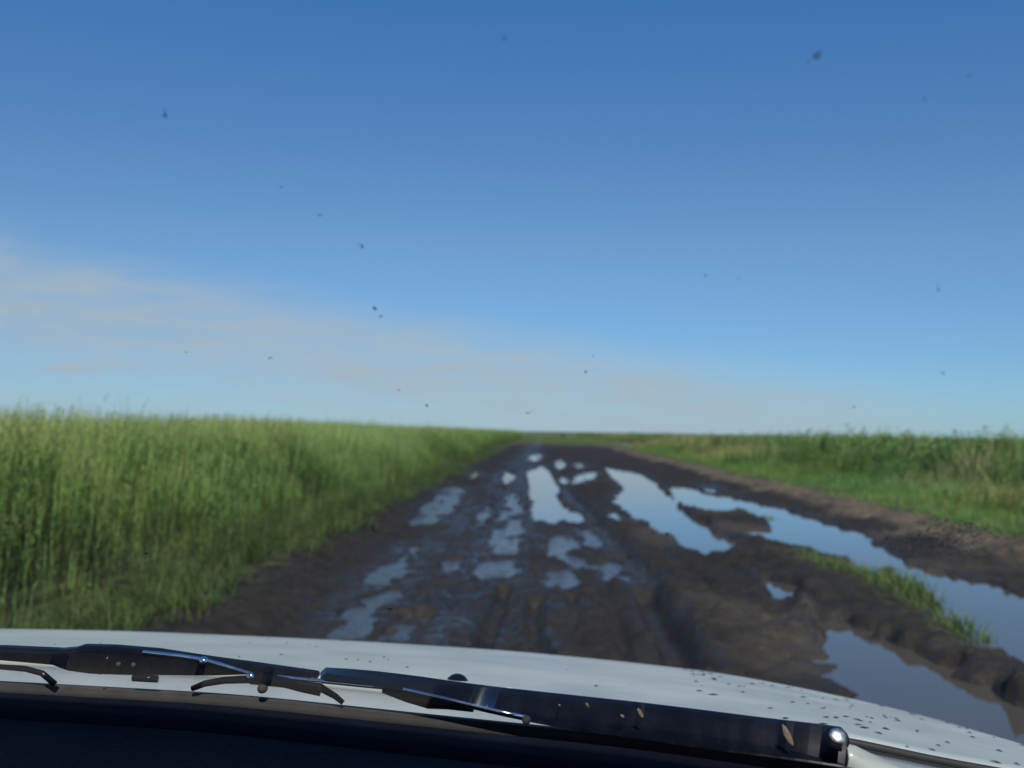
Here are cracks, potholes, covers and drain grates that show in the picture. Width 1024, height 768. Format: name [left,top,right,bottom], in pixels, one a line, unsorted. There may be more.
pothole [524,563,596,590]
pothole [475,487,534,555]
pothole [664,484,1024,665]
pothole [458,554,537,583]
pothole [601,466,760,558]
pothole [396,483,472,525]
pothole [565,523,619,553]
pothole [784,591,1024,745]
pothole [588,550,643,584]
pothole [533,530,592,560]
